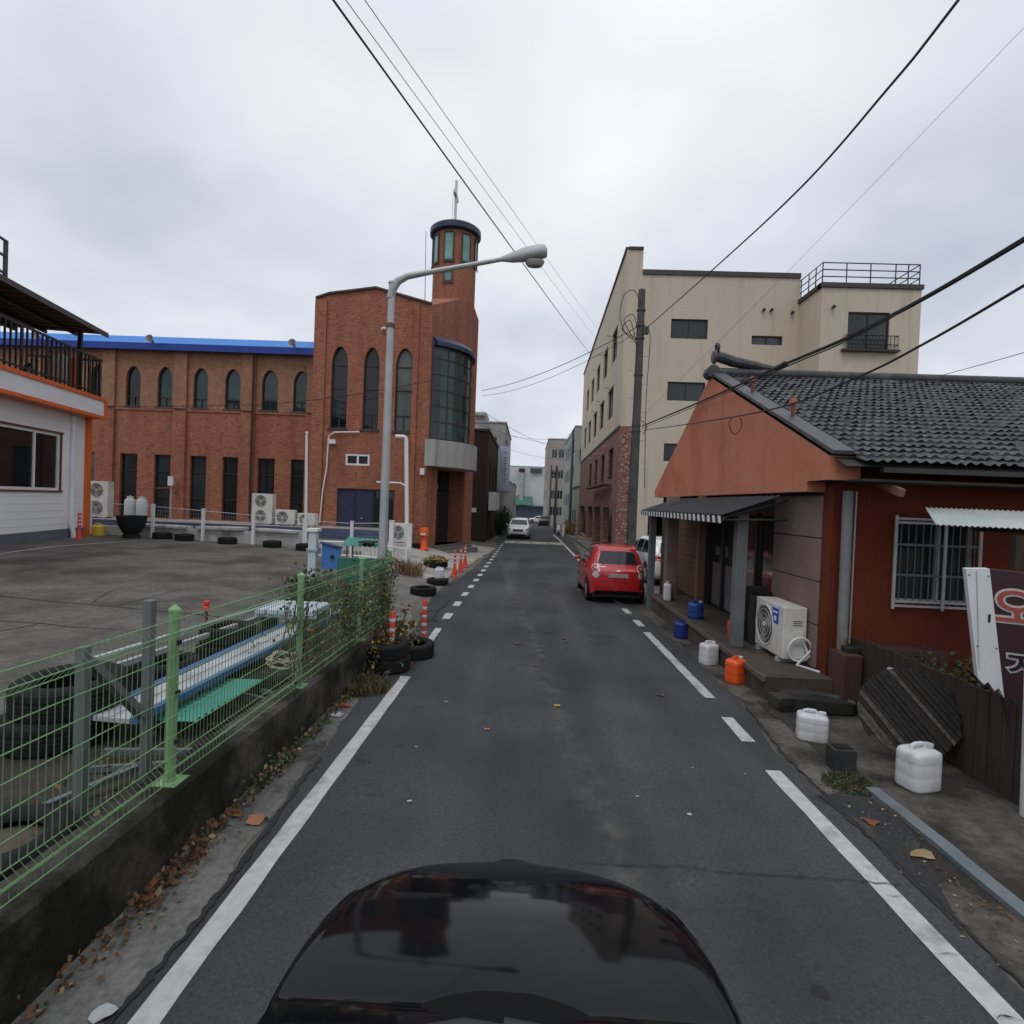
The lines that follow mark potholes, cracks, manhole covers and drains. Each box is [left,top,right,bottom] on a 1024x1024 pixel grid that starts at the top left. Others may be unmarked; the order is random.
crack [0,620,104,631]
crack [0,587,223,617]
manhole cover [585,633,620,642]
